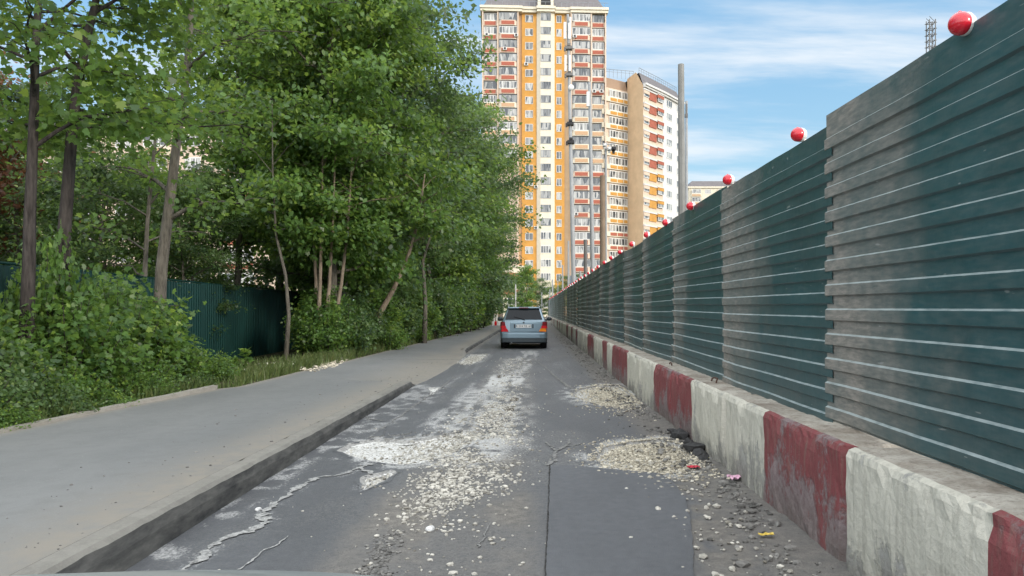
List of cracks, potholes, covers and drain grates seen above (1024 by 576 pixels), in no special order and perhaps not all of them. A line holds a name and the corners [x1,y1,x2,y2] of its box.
crack [181,463,373,570]
crack [545,439,581,465]
